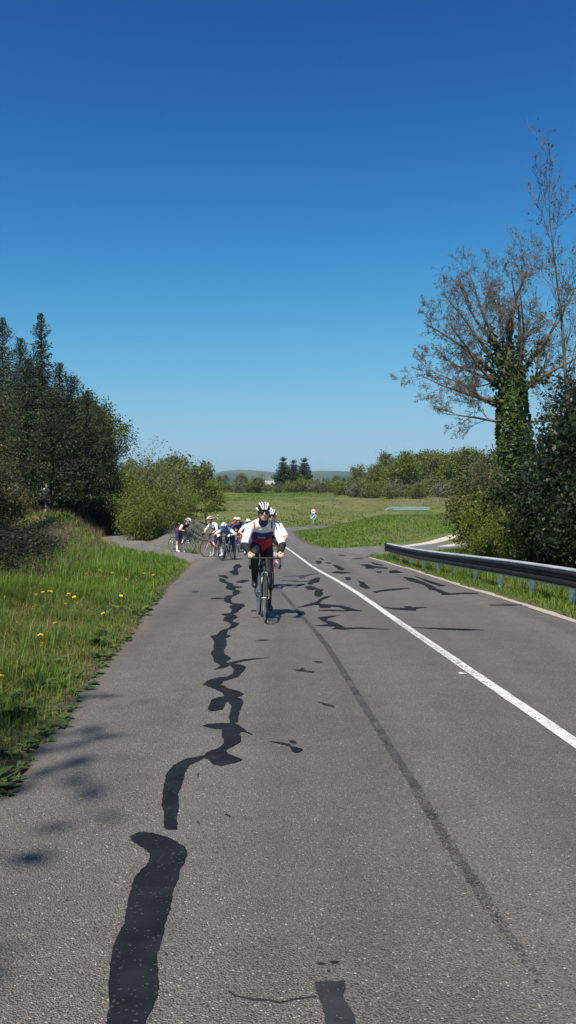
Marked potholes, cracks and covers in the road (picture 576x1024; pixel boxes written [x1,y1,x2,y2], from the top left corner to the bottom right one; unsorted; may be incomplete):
crack [228,990,317,1004]
